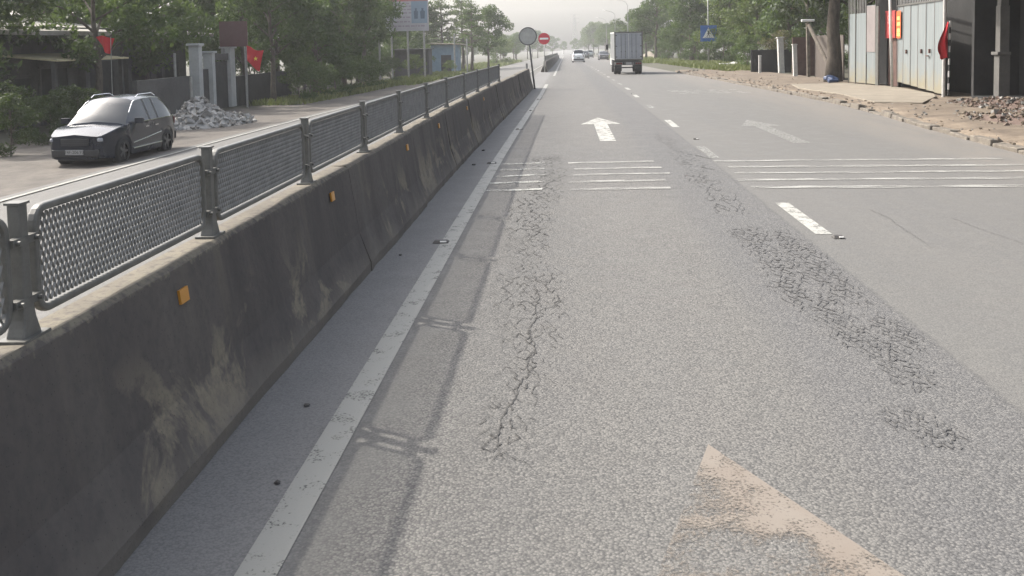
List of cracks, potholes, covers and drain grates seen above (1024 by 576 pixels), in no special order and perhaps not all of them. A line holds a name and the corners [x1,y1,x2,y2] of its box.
crack [477,232,573,471]
crack [503,156,567,244]
crack [726,226,944,393]
